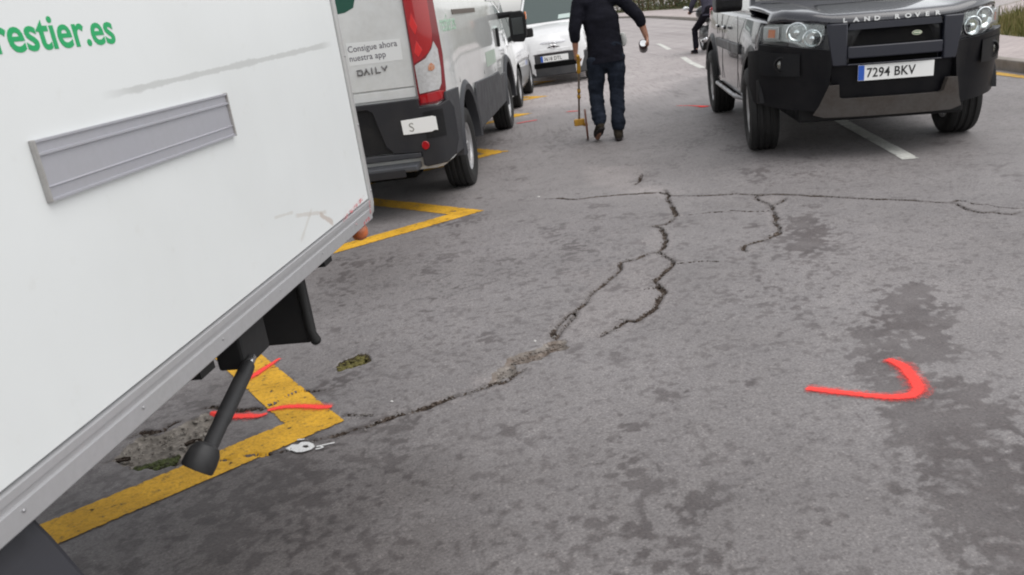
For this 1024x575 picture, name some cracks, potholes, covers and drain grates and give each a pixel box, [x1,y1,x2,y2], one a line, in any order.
crack [268,367,524,456]
crack [550,175,1017,340]
pothole [335,354,371,372]
pothole [112,413,214,471]
